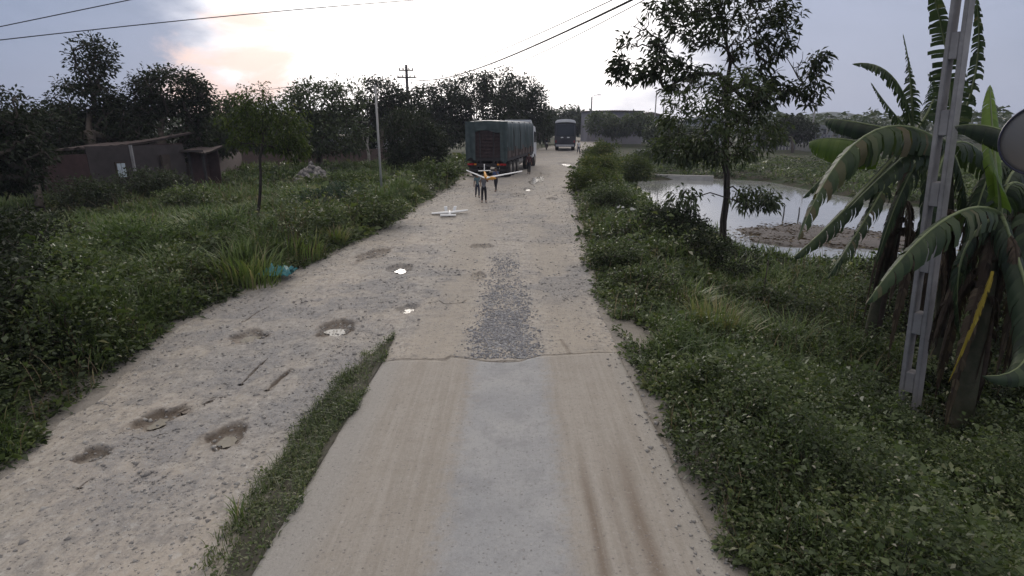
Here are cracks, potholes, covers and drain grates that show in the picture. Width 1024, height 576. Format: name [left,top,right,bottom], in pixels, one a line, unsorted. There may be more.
pothole [391,302,424,316]
pothole [115,401,204,439]
pothole [195,417,259,458]
pothole [221,327,278,347]
pothole [55,441,127,471]
pothole [307,317,362,340]
pothole [382,262,420,275]
crack [178,357,294,416]
